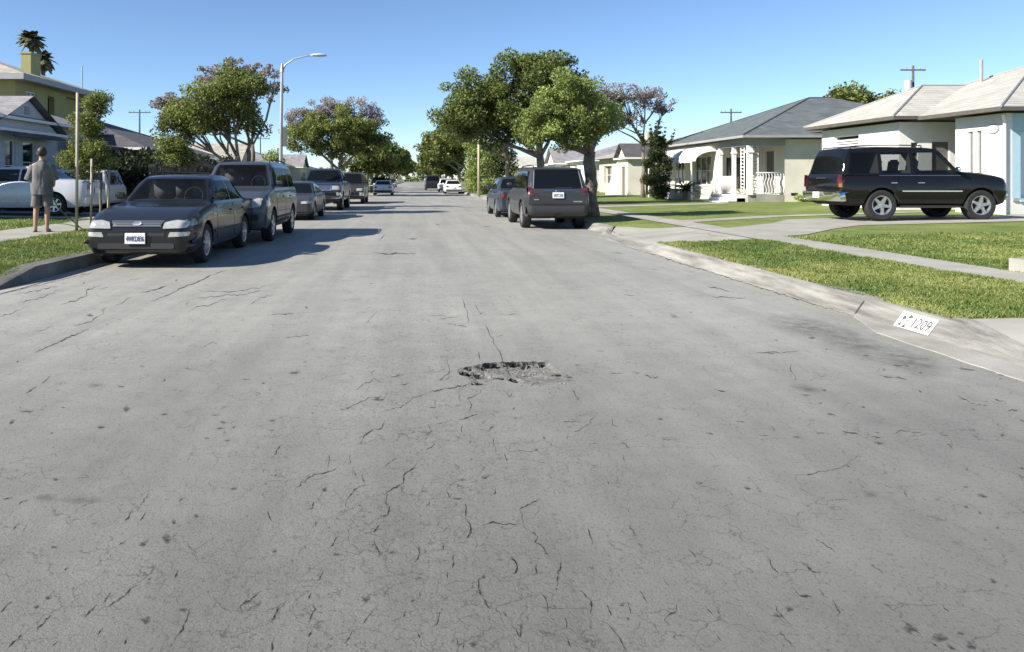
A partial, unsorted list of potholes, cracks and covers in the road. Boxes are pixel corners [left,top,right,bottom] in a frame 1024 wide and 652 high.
crack [579,590,646,651]
crack [189,285,293,316]
crack [84,578,150,634]
crack [4,274,165,325]
crack [430,304,547,374]
crack [297,362,571,647]
pothole [458,362,581,389]
